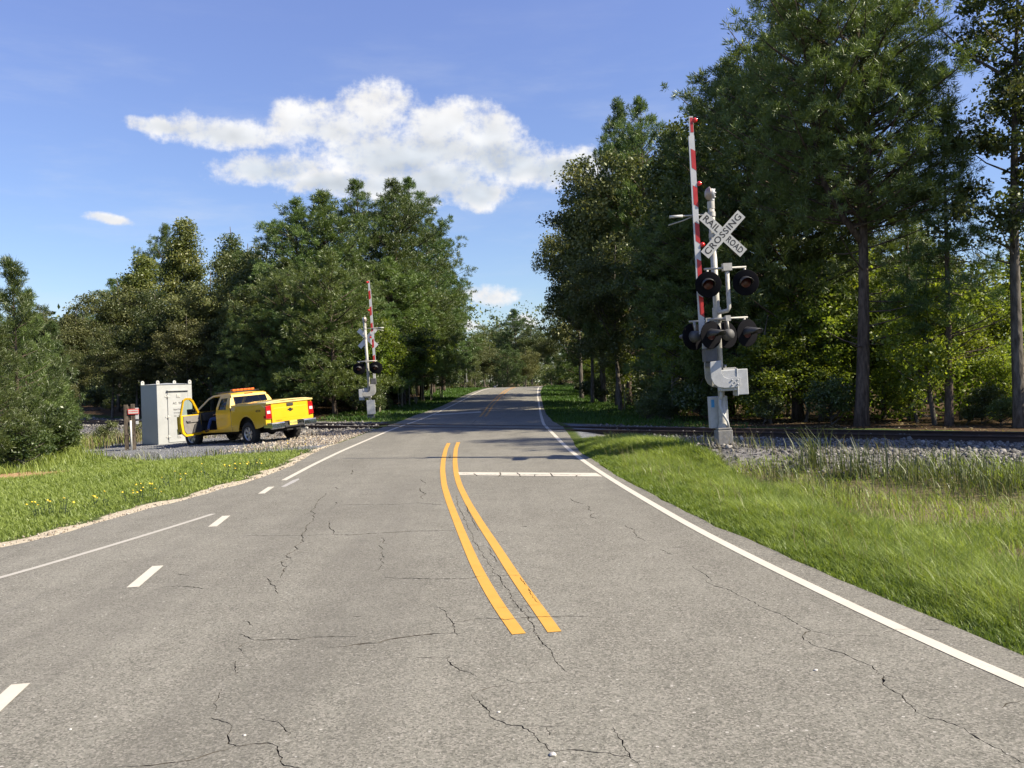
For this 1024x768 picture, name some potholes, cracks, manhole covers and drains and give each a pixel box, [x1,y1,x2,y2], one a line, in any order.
crack [693,567,1023,763]
crack [118,693,299,768]
crack [234,471,587,676]
crack [417,657,639,765]
